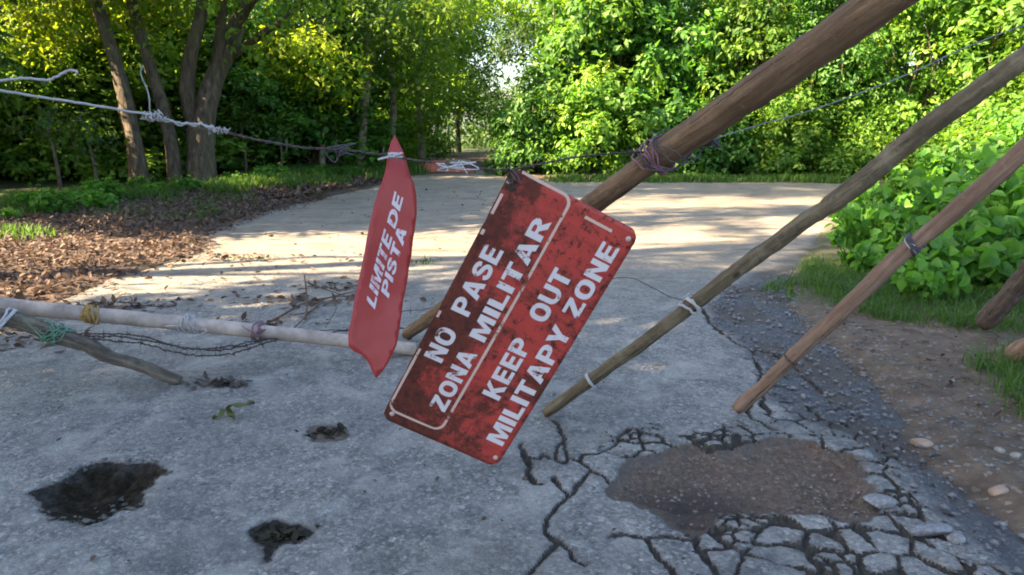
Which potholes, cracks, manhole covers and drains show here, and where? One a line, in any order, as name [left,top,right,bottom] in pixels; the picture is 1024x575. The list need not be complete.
pothole [308,425,348,442]
pothole [28,462,167,525]
crack [518,309,987,575]
pothole [248,520,312,562]
